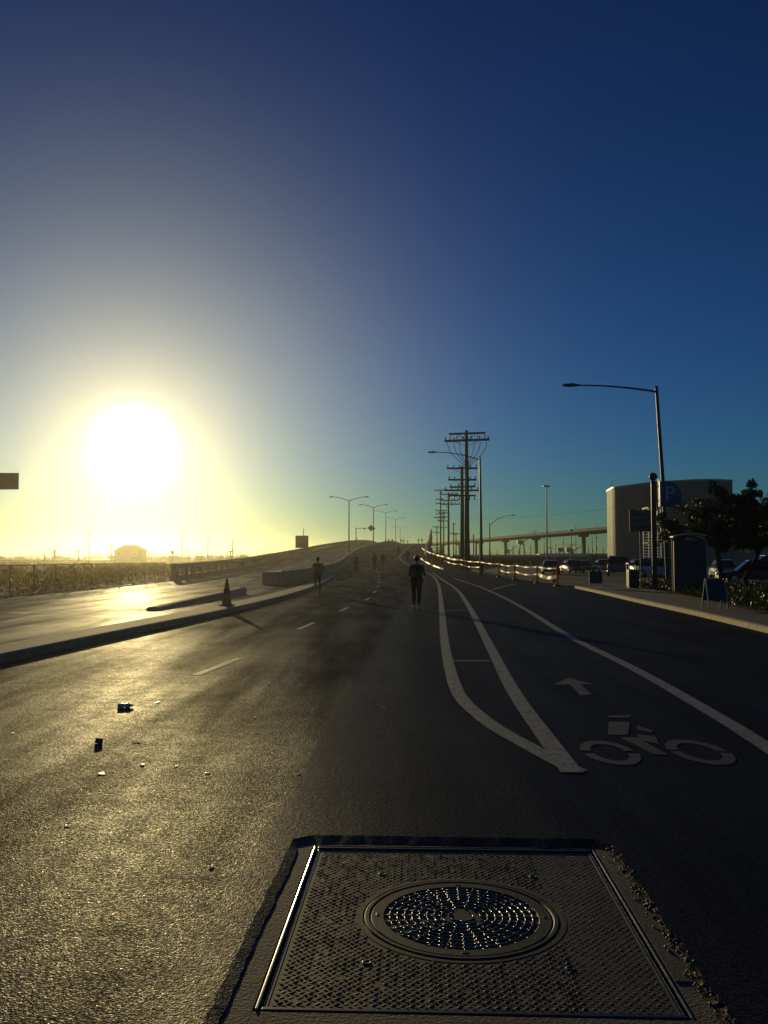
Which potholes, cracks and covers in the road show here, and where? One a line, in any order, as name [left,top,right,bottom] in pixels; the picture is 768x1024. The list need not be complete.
manhole cover [364,881,559,960]
